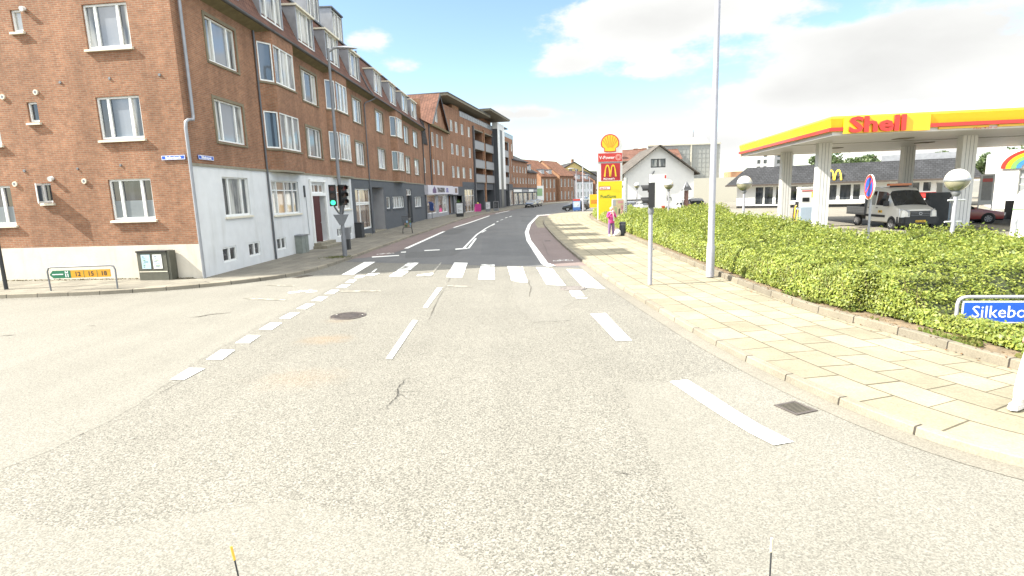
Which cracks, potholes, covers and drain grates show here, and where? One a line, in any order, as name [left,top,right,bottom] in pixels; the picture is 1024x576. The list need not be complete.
manhole cover [330,312,366,320]
drain grate [774,401,818,416]
